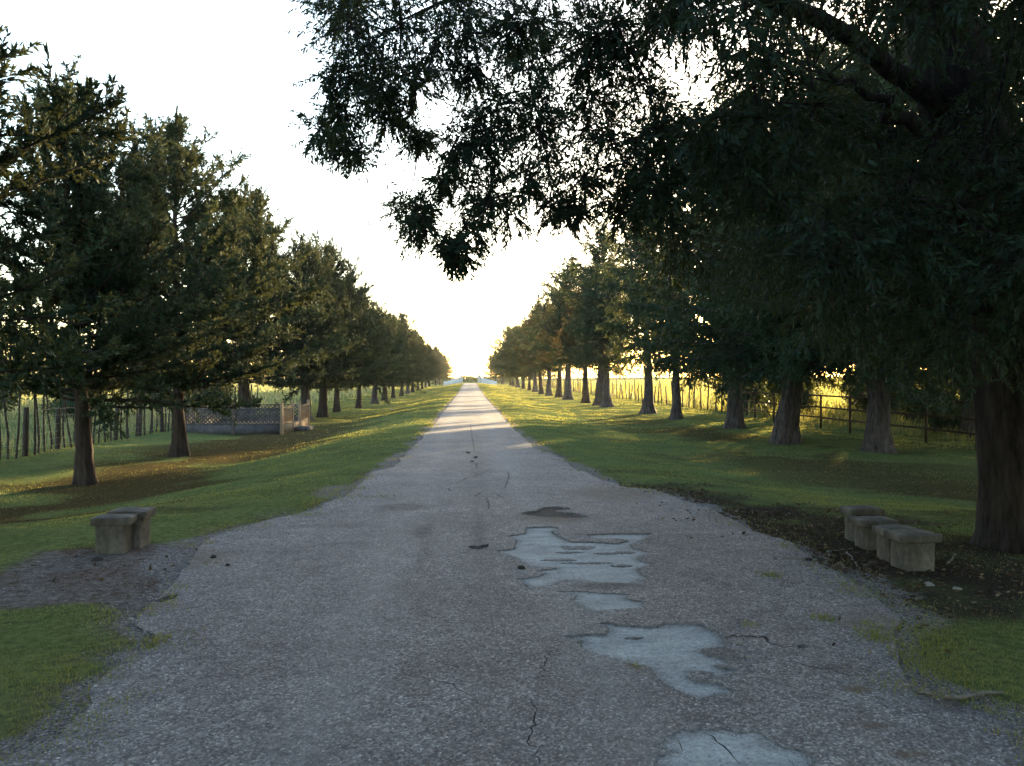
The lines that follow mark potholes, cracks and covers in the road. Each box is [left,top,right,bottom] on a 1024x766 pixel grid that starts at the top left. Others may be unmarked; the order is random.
pothole [558,622,736,698]
crack [525,645,558,765]
pothole [557,591,645,611]
pothole [497,526,654,588]
pothole [520,506,588,518]
crack [725,634,849,676]
pothole [653,728,817,766]
